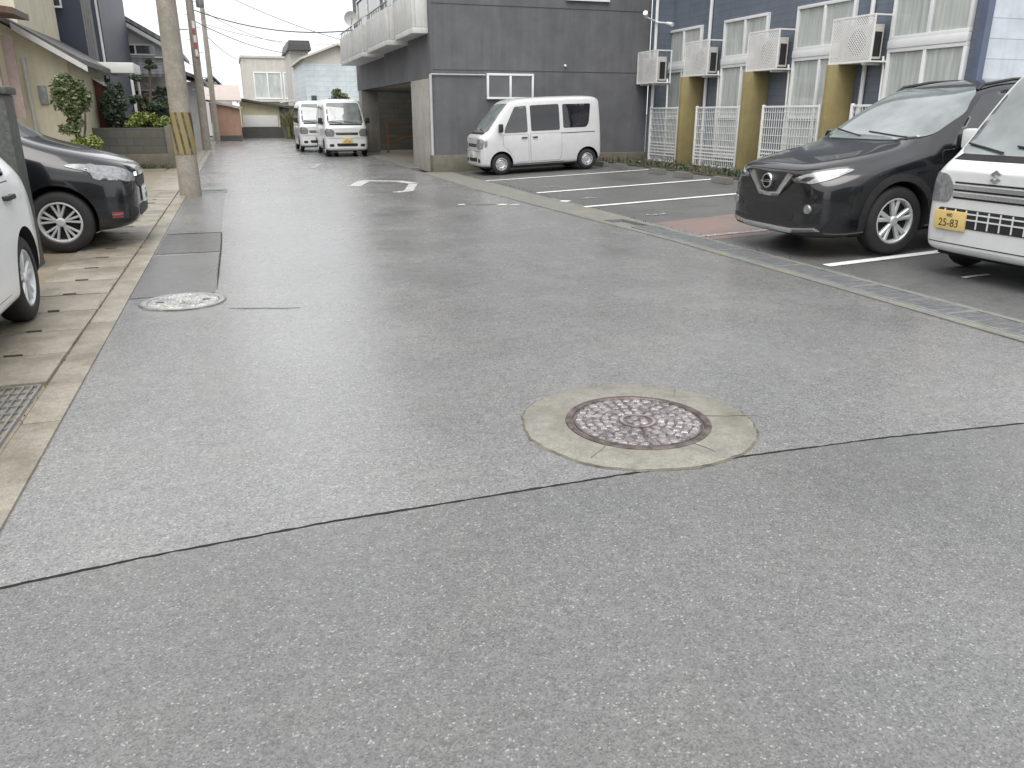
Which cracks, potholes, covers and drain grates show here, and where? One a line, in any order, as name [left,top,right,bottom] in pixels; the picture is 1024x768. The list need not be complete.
manhole cover [521,384,759,472]
drain grate [0,384,42,447]
manhole cover [137,292,227,312]
